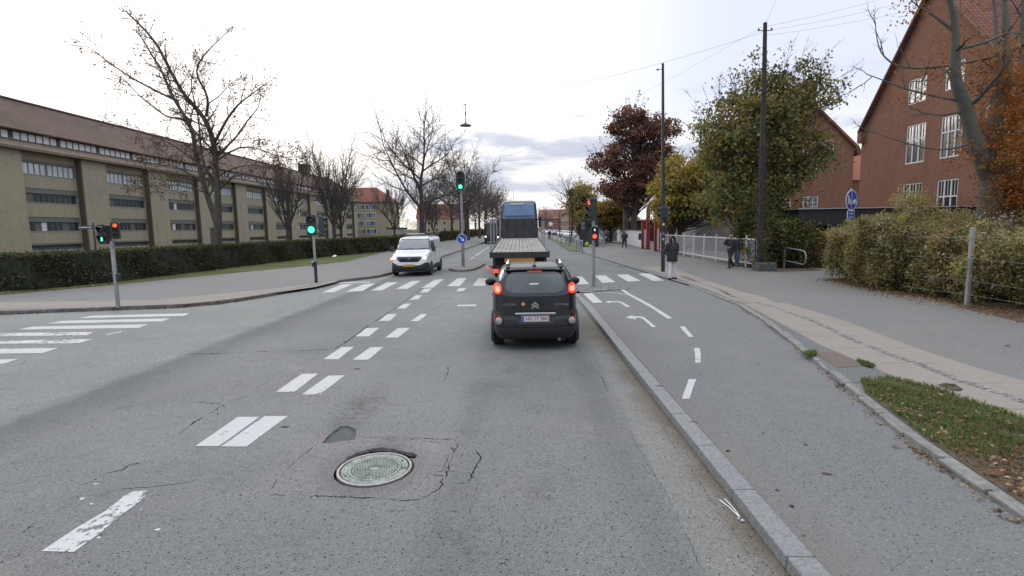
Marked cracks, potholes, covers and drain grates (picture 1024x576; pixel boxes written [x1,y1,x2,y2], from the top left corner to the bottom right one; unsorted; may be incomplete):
crack [64,462,219,500]
manhole cover [336,452,412,488]
crack [179,384,263,434]
pothole [322,426,357,444]
crack [273,436,482,538]
